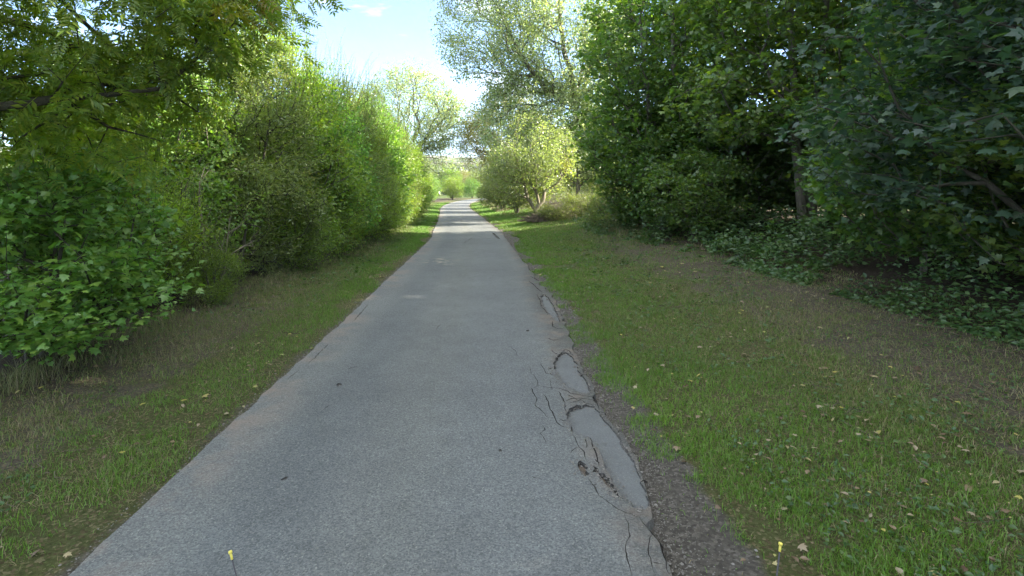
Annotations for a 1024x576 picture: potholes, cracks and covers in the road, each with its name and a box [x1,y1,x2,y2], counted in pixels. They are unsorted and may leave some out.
pothole [566,404,649,509]
pothole [553,352,591,393]
crack [529,276,669,576]
